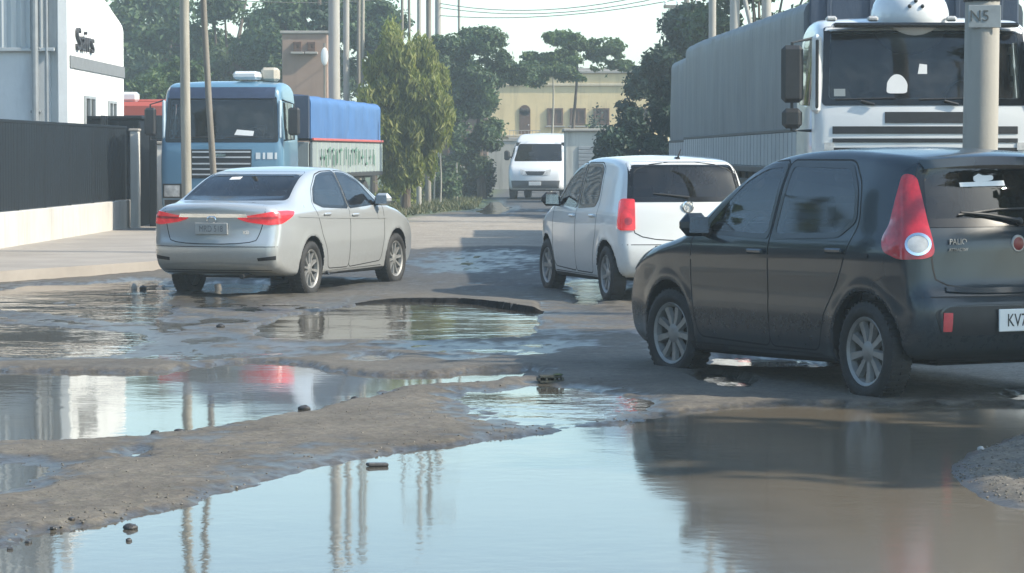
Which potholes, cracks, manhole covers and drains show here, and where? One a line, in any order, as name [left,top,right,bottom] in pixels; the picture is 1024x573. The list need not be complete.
pothole [0,321,210,359]
pothole [423,250,525,272]
pothole [447,380,659,430]
pothole [202,280,280,294]
pothole [0,277,223,325]
pothole [0,405,1024,573]
pothole [0,360,540,441]
pothole [246,302,543,341]
